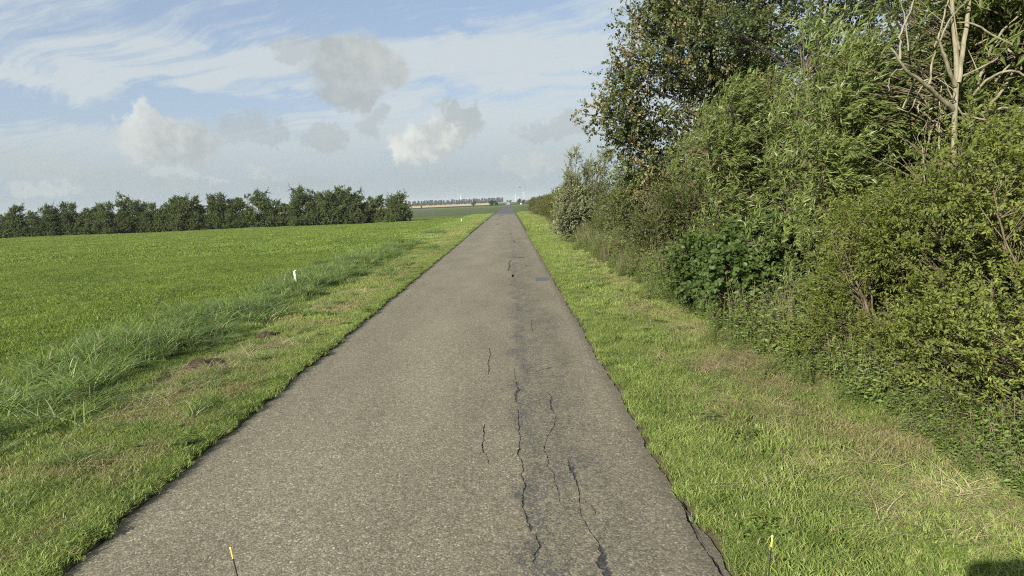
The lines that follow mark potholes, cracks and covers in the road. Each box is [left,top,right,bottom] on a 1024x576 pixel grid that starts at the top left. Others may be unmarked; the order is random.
crack [544,394,561,506]
